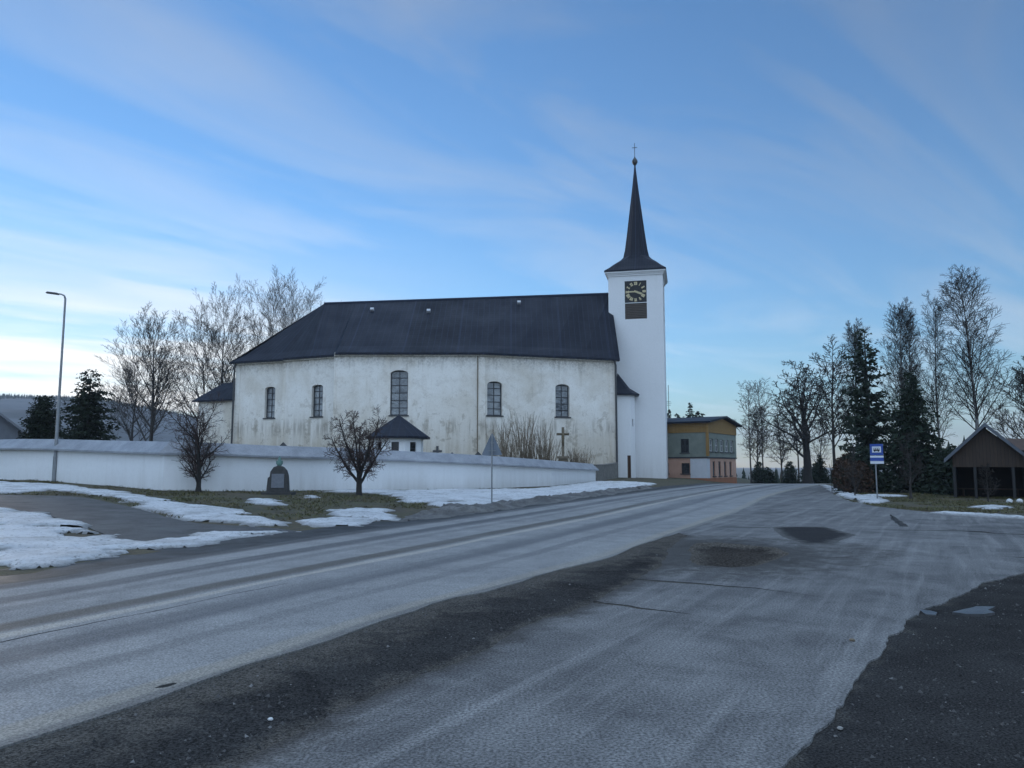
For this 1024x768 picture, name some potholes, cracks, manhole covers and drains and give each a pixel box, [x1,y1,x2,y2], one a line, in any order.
crack [590,599,687,614]
pothole [688,542,789,567]
crack [637,579,815,596]
